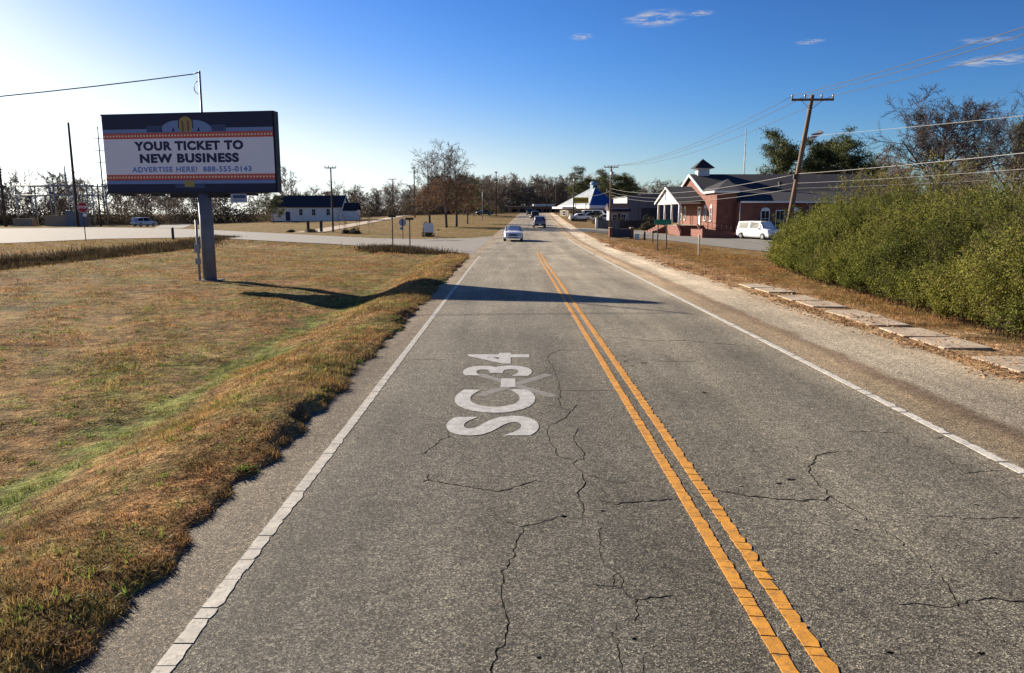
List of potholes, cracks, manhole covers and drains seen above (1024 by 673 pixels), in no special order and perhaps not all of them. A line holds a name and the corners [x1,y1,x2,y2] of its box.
crack [421,474,544,492]
crack [860,431,1000,474]
crack [490,350,677,673]
crack [717,451,1024,651]
